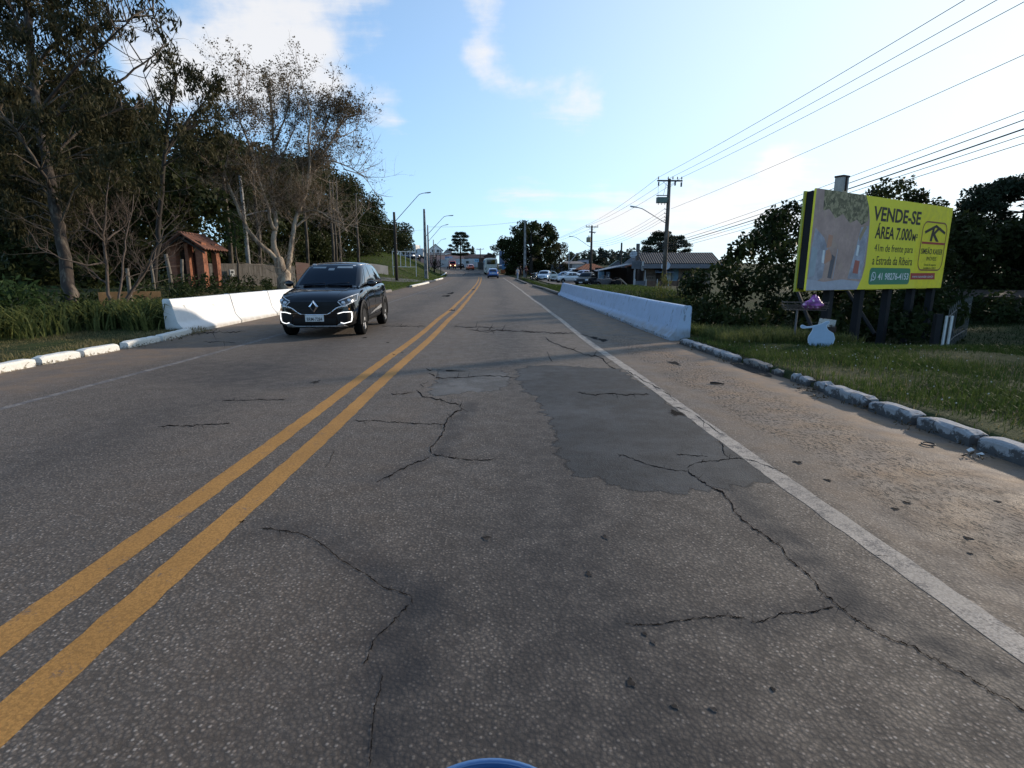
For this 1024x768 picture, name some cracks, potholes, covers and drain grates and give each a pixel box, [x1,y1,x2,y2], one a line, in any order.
crack [356,368,515,481]
crack [263,527,413,766]
crack [456,324,1024,711]
